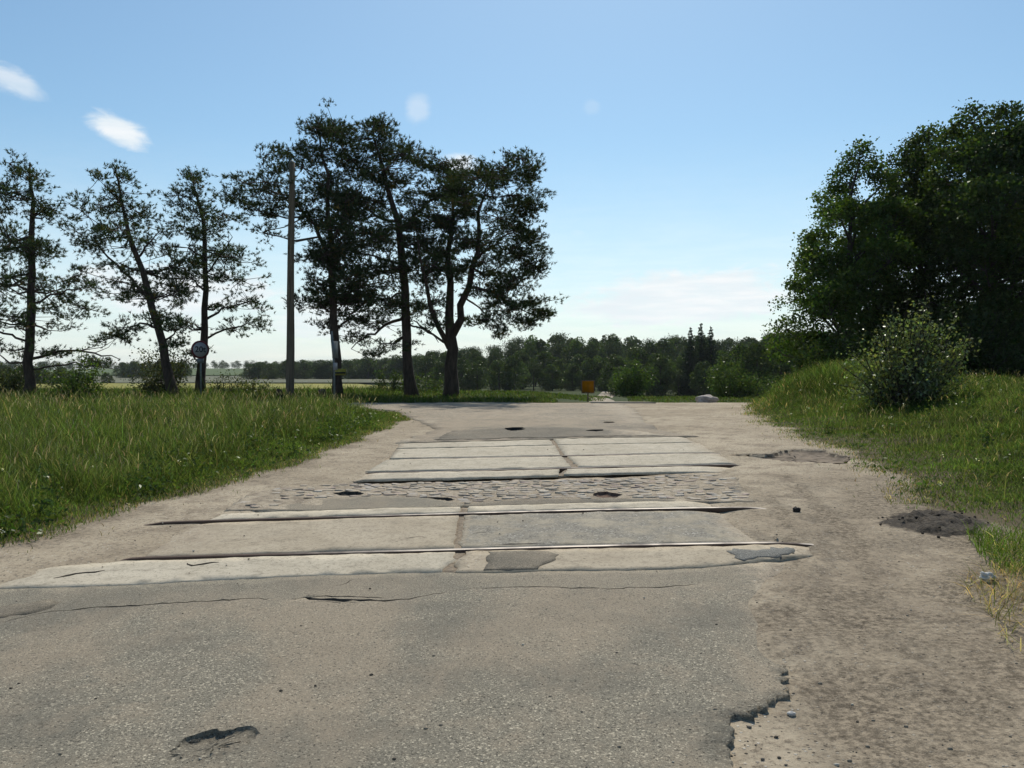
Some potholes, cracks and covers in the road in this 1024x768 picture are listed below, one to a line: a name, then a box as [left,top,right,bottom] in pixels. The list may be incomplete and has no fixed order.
pothole [164,726,260,767]
crack [5,580,695,622]
crack [56,570,105,578]
